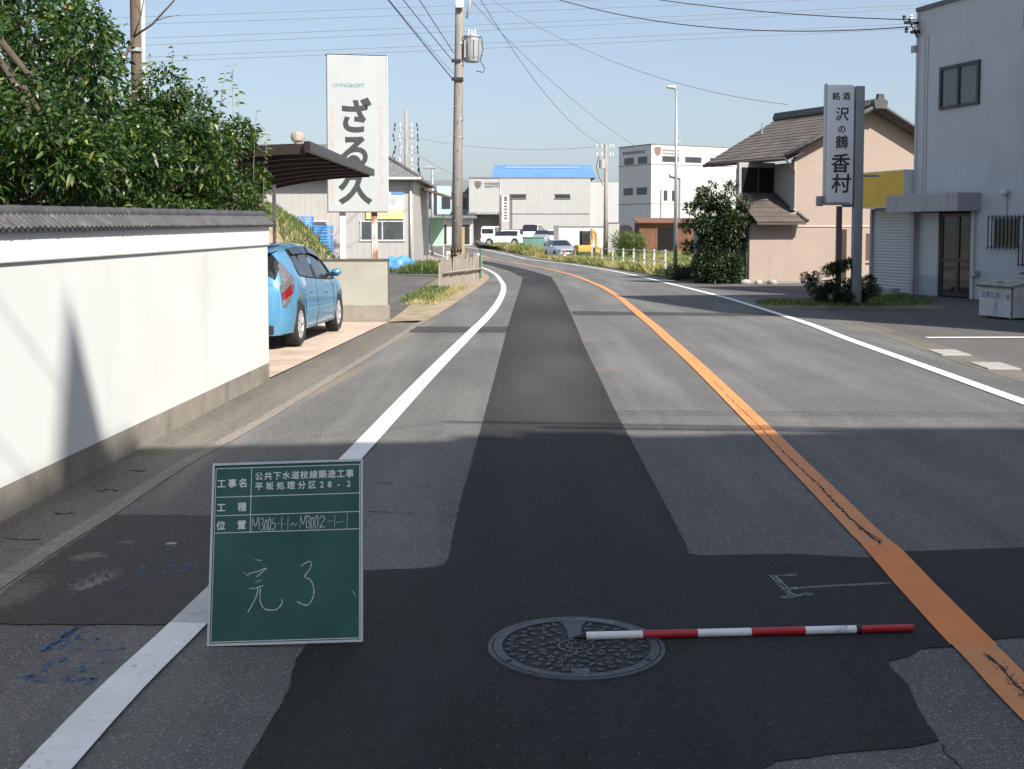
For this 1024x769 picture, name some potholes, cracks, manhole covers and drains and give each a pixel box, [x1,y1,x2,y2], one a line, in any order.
crack [983,652,1024,698]
crack [940,743,963,769]
manhole cover [488,617,666,681]
